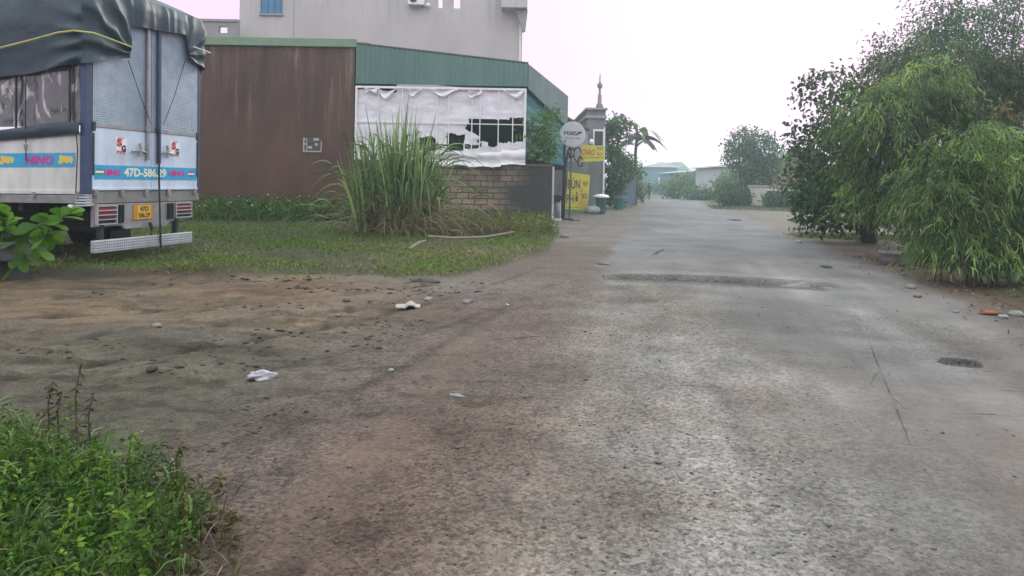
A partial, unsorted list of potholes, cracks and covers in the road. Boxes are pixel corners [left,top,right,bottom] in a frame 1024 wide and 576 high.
crack [858,340,923,447]
crack [949,370,1024,421]
crack [599,246,681,269]
